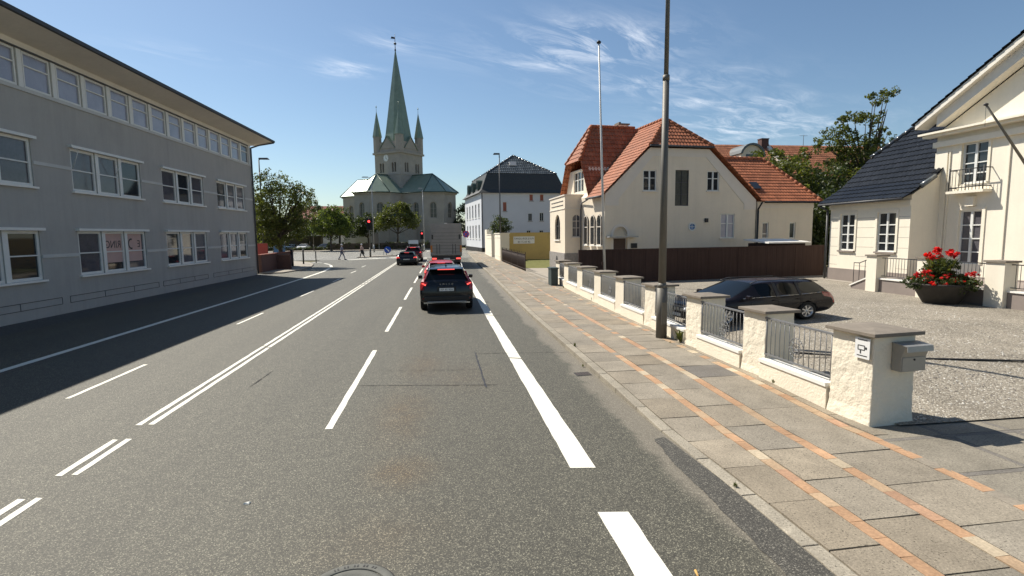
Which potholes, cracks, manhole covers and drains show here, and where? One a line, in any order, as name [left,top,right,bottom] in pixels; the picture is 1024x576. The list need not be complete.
manhole cover [320,563,395,576]
